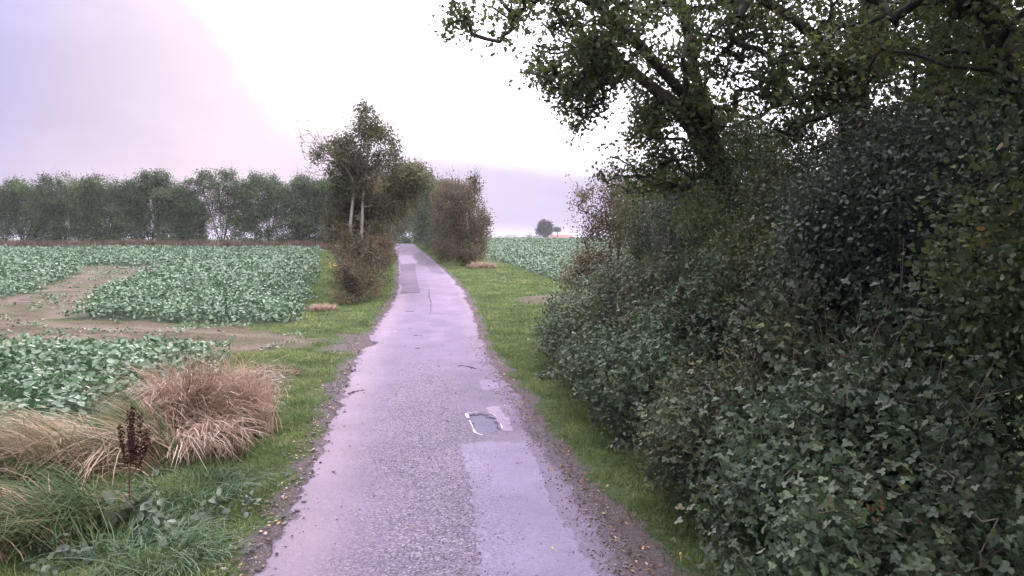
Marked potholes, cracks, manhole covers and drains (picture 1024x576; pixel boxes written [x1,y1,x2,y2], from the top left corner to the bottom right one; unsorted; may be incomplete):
pothole [469,413,502,434]
